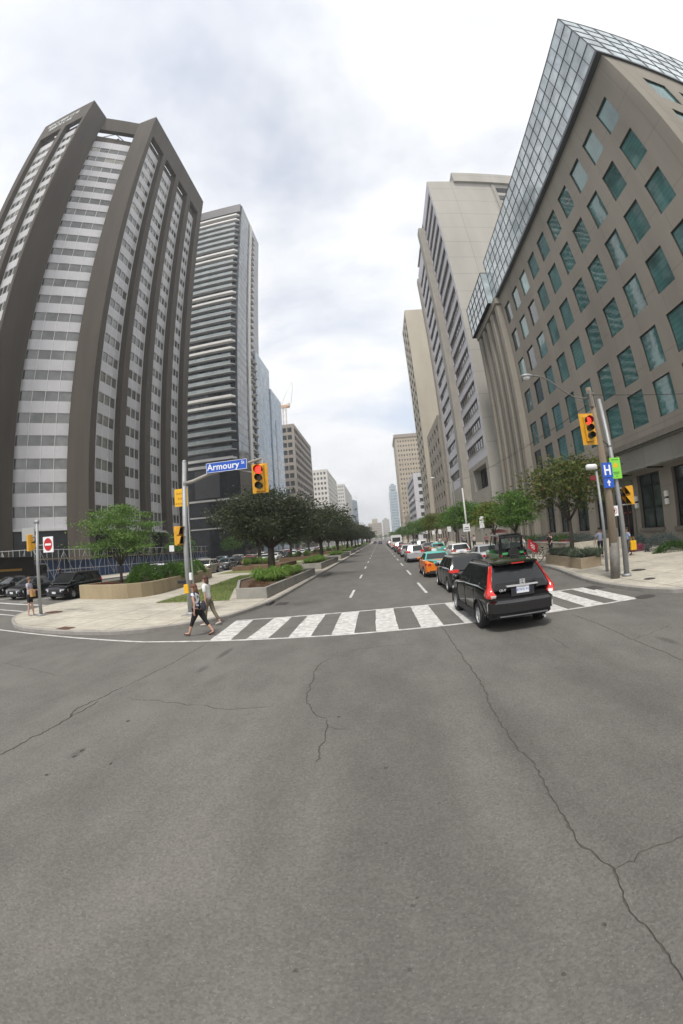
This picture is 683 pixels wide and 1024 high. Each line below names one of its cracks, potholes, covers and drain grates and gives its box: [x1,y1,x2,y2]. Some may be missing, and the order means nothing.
crack [0,687,267,755]
crack [306,663,336,762]
crack [441,626,683,981]
